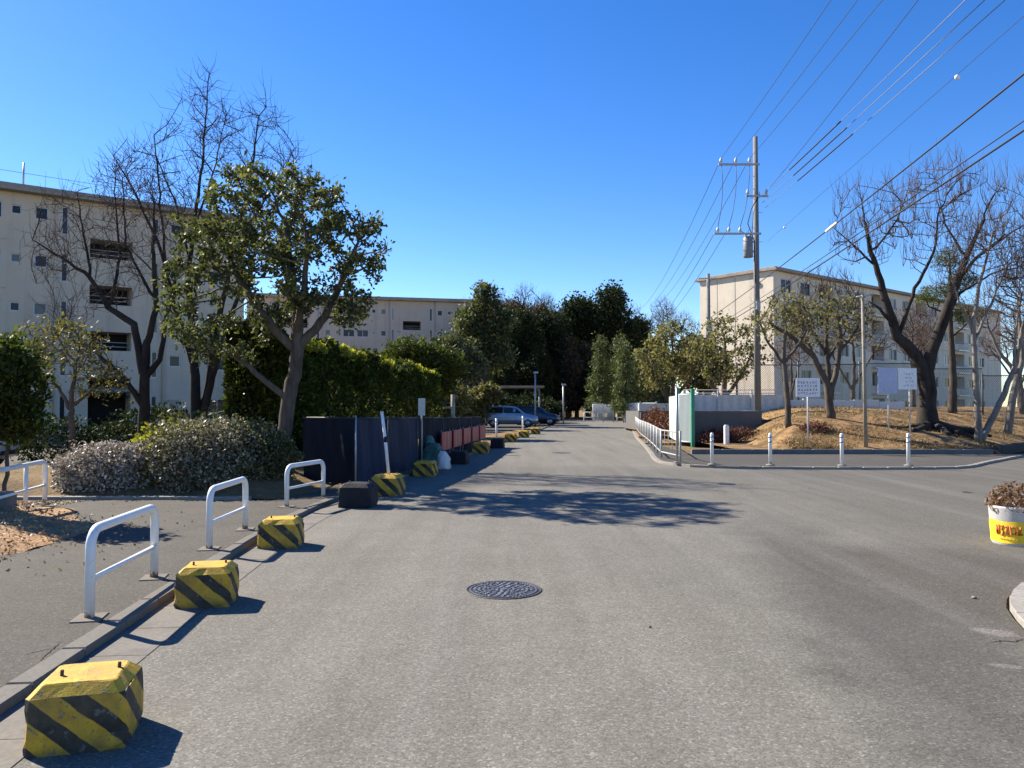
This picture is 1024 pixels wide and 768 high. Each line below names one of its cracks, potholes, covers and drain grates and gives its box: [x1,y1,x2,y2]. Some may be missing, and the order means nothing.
manhole cover [465,580,542,599]
